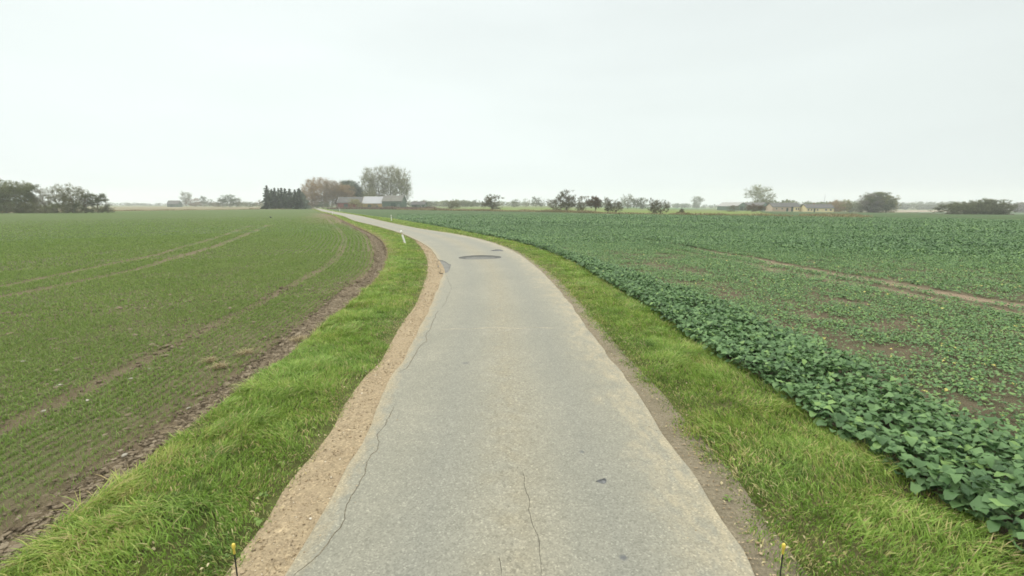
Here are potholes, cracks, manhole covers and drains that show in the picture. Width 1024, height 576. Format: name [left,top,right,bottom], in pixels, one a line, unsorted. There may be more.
crack [294,406,394,575]
crack [523,474,542,576]
